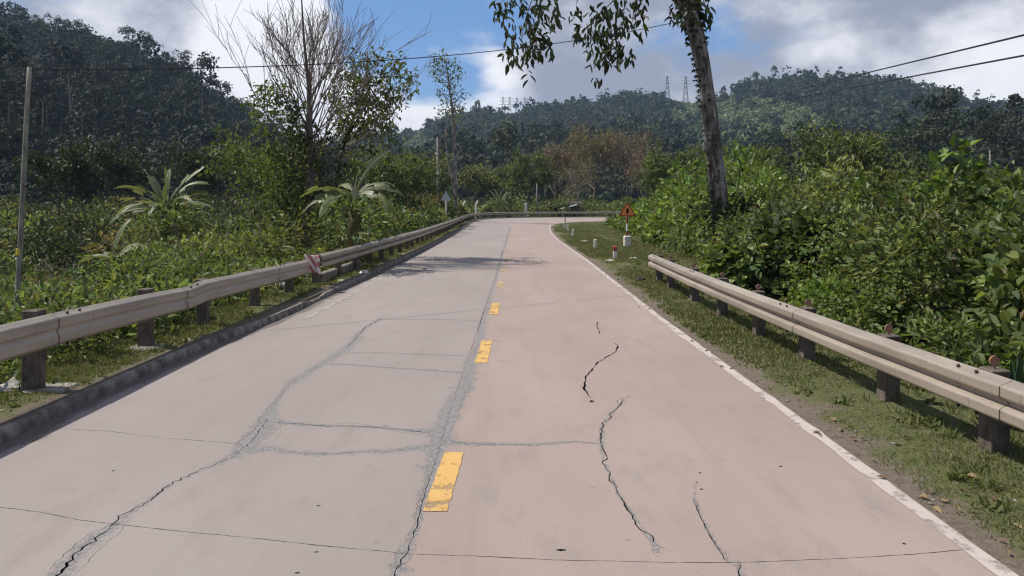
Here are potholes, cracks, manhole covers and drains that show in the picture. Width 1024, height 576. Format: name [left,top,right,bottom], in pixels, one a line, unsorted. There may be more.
crack [693,499,741,576]
crack [458,322,654,542]
crack [50,319,447,576]
